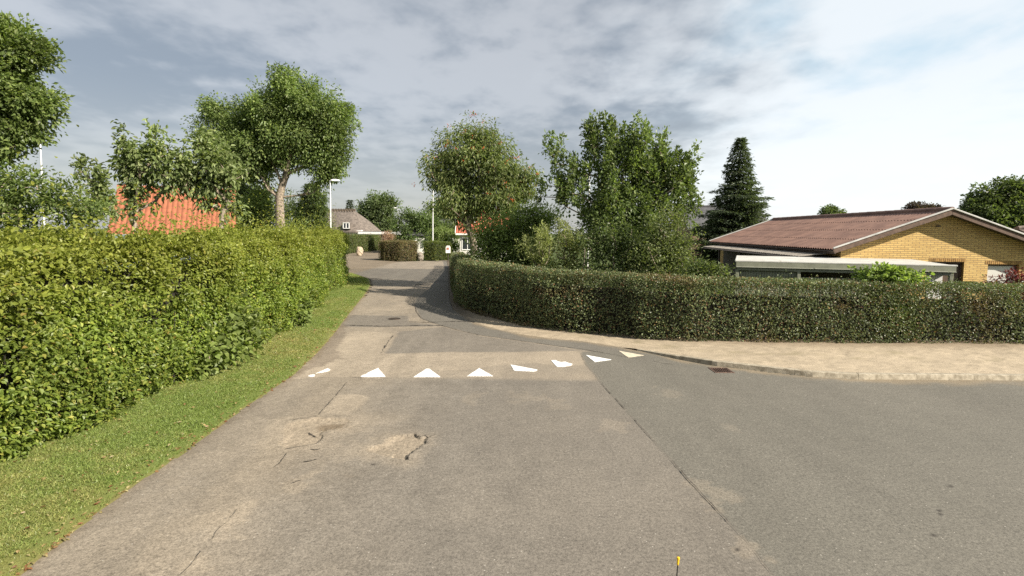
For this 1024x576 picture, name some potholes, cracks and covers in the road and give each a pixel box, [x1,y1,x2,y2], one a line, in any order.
crack [277,381,348,483]
crack [359,321,475,353]
